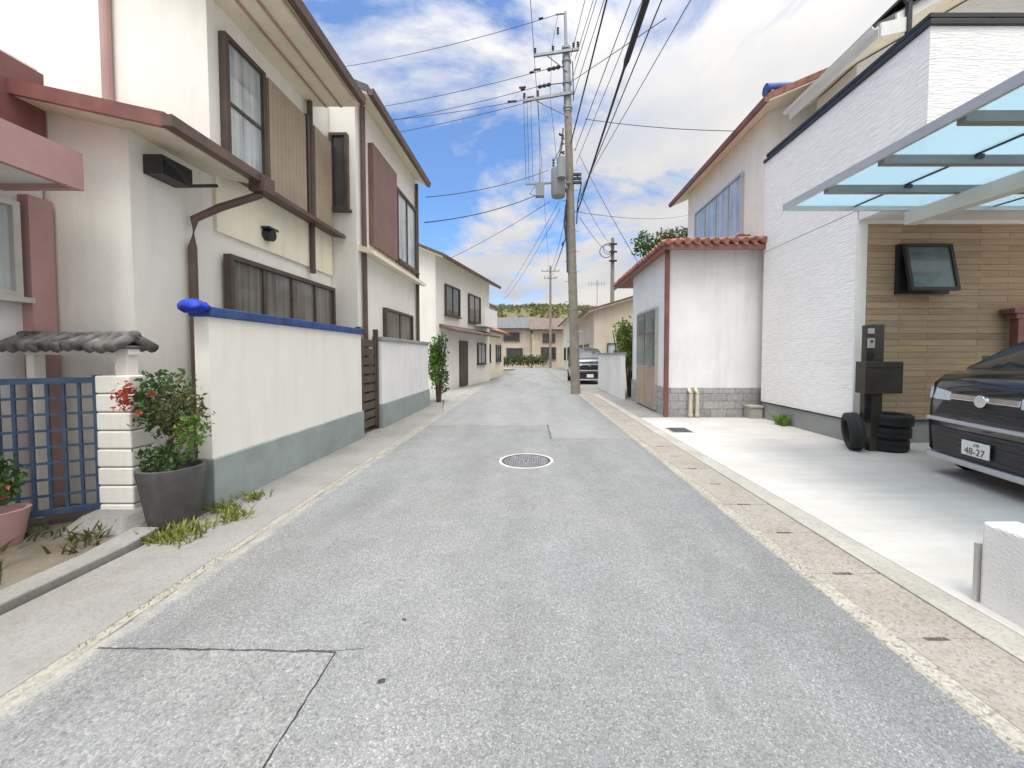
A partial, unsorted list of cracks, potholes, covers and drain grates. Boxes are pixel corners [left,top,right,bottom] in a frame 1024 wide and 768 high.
manhole cover [499,453,554,469]
